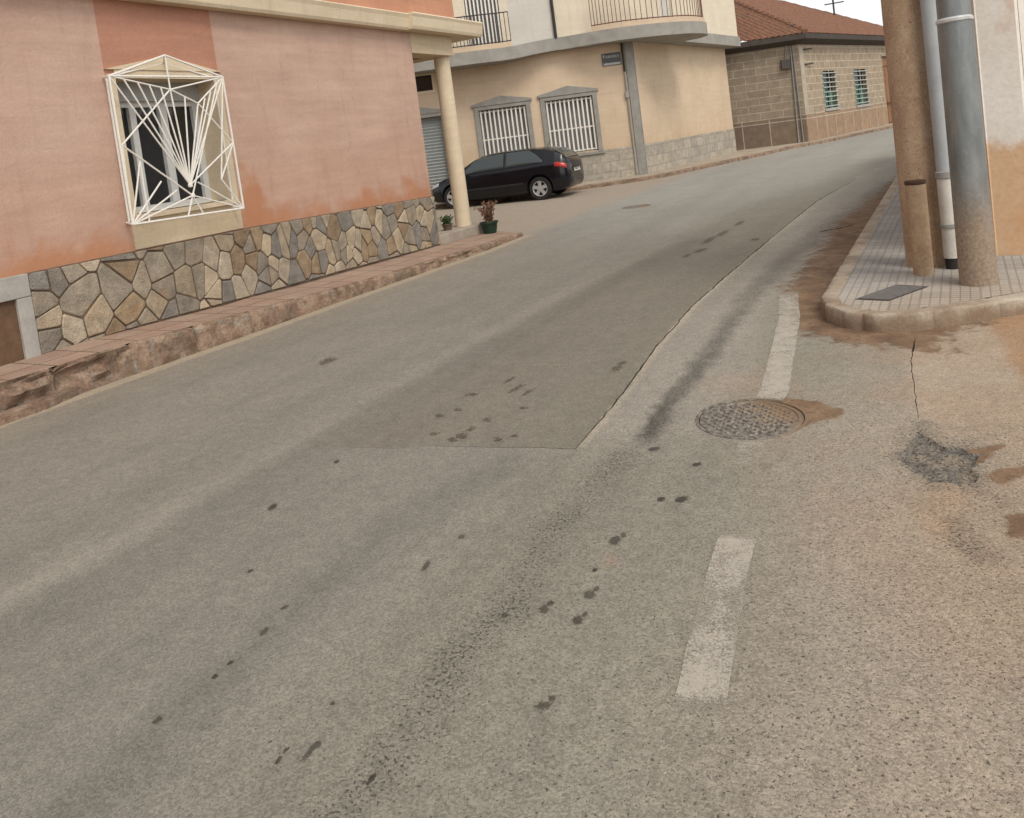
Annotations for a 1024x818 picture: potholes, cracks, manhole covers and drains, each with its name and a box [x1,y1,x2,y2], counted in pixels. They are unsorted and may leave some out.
utility cover [855,284,928,301]
manhole cover [695,399,808,440]
crack [911,339,919,418]
